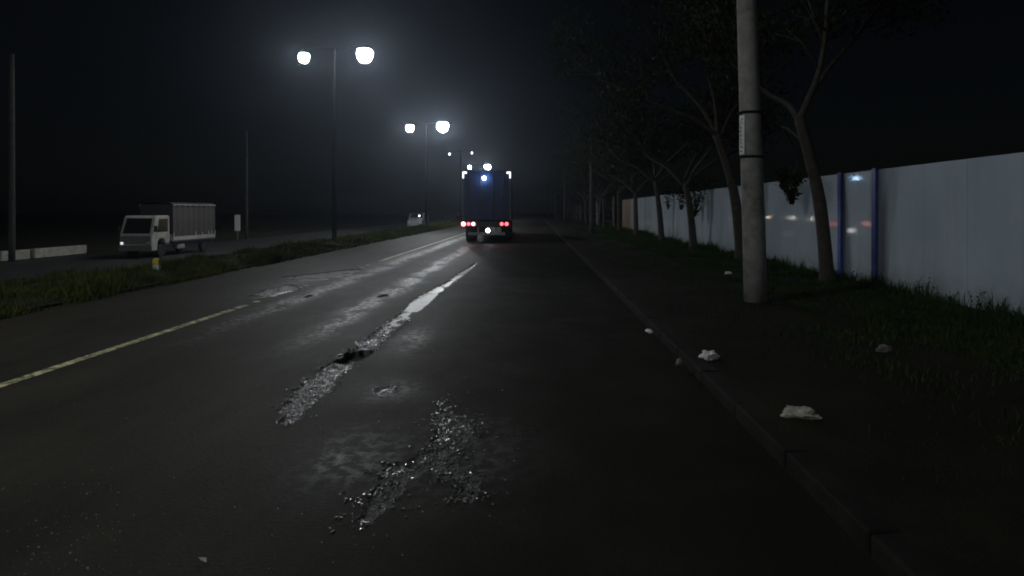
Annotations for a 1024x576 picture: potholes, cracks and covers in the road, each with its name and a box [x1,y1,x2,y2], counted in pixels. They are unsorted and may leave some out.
pothole [372,385,398,397]
pothole [335,349,377,365]
pothole [404,293,439,313]
pothole [328,396,509,538]
